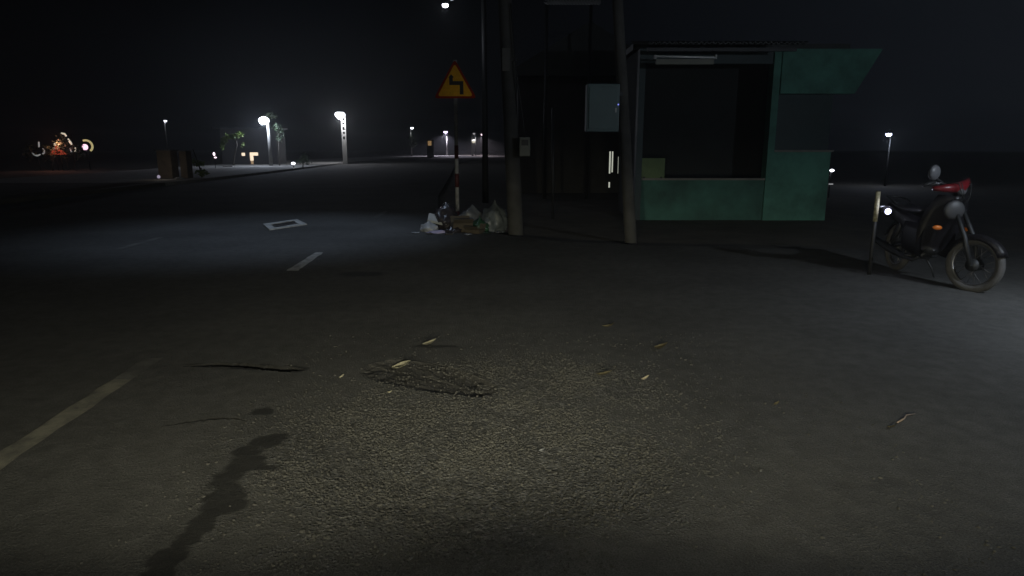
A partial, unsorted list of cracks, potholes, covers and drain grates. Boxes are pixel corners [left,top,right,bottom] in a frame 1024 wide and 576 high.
crack [163,417,245,426]
pothole [359,359,497,397]
crack [183,363,305,372]
